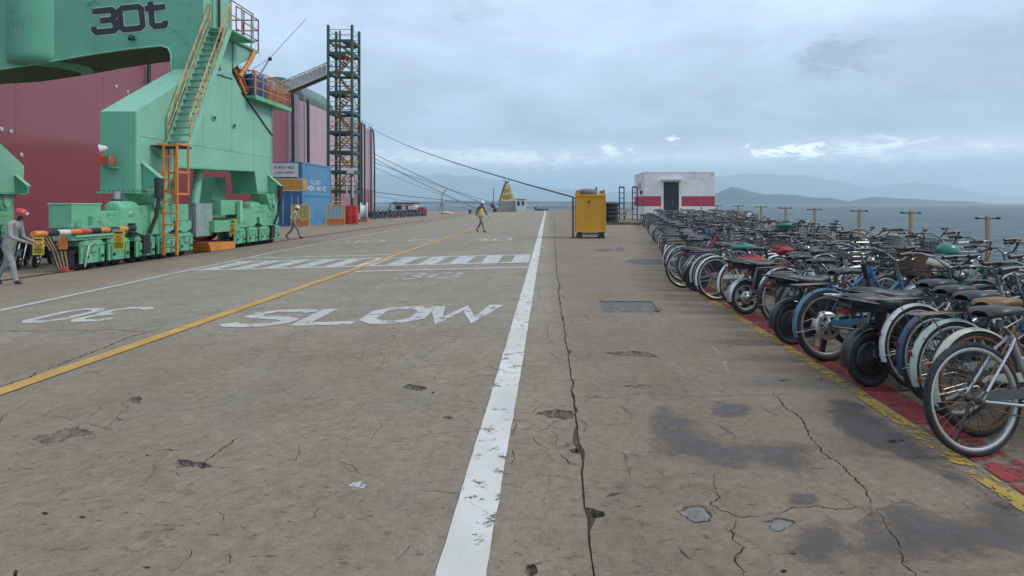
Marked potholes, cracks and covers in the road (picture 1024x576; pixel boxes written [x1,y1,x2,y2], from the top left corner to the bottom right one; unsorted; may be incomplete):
pothole [176,459,212,469]
crack [510,406,597,482]
pothole [536,409,576,420]
pothole [586,507,605,523]
pothole [32,425,95,444]
crack [566,380,916,576]
manhole cover [598,301,661,313]
